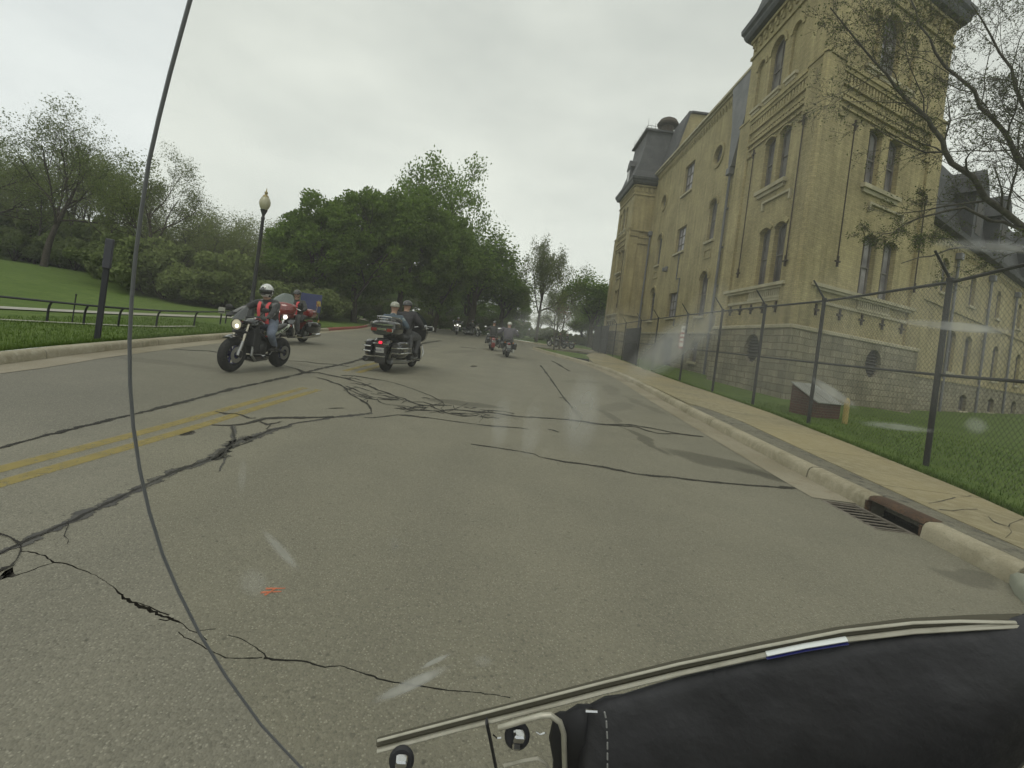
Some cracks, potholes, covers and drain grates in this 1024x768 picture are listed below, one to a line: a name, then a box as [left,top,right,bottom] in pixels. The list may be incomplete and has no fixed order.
drain grate [822,496,942,536]
crack [16,551,510,698]
crack [284,360,703,437]
crack [471,444,797,489]
